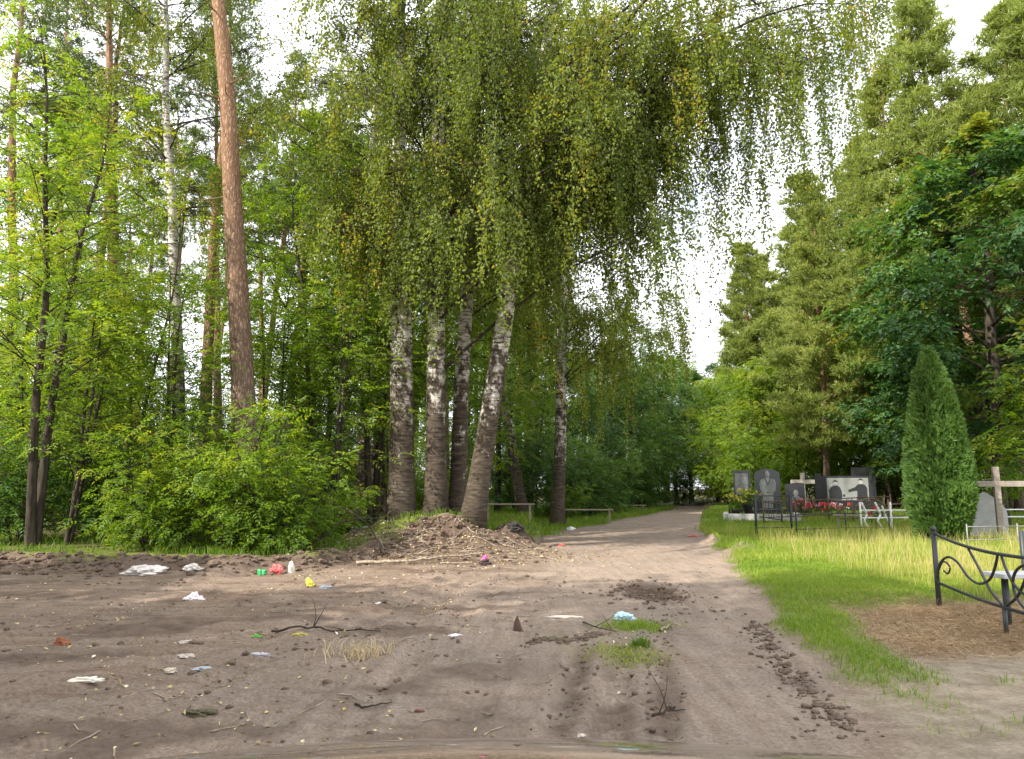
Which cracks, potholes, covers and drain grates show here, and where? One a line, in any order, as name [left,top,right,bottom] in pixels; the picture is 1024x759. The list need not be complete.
pothole [622,582,687,603]
